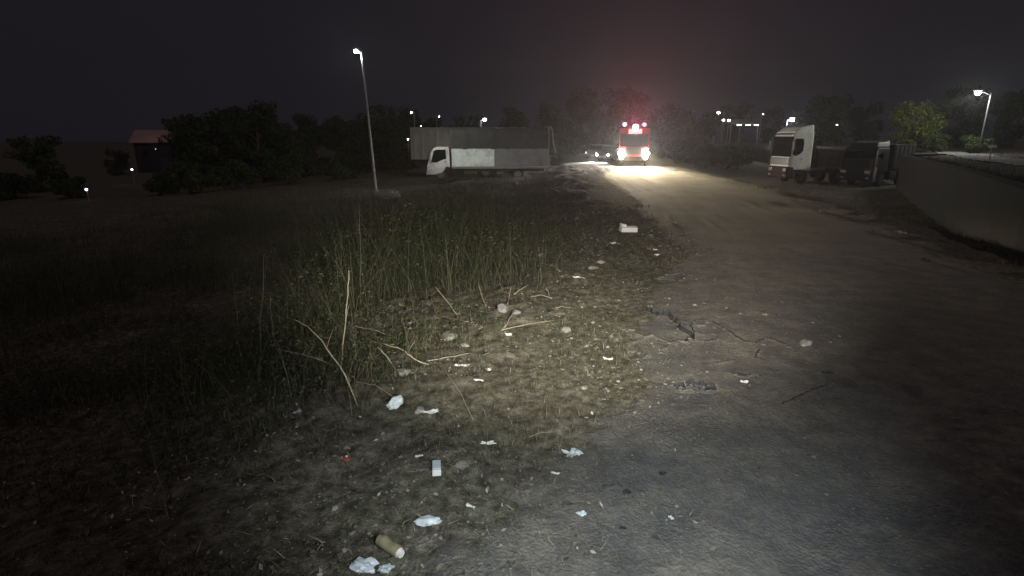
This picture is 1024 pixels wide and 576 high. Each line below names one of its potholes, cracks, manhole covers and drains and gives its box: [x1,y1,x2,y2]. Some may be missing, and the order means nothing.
crack [658,318,832,405]
pothole [668,379,722,394]
